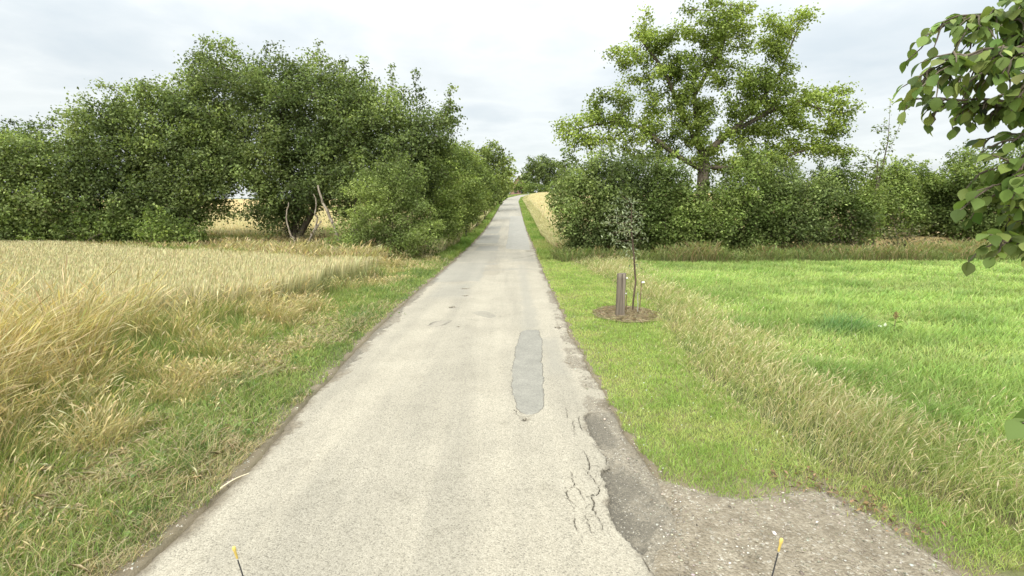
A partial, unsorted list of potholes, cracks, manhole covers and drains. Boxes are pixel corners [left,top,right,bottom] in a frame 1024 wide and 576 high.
crack [563,407,612,533]
